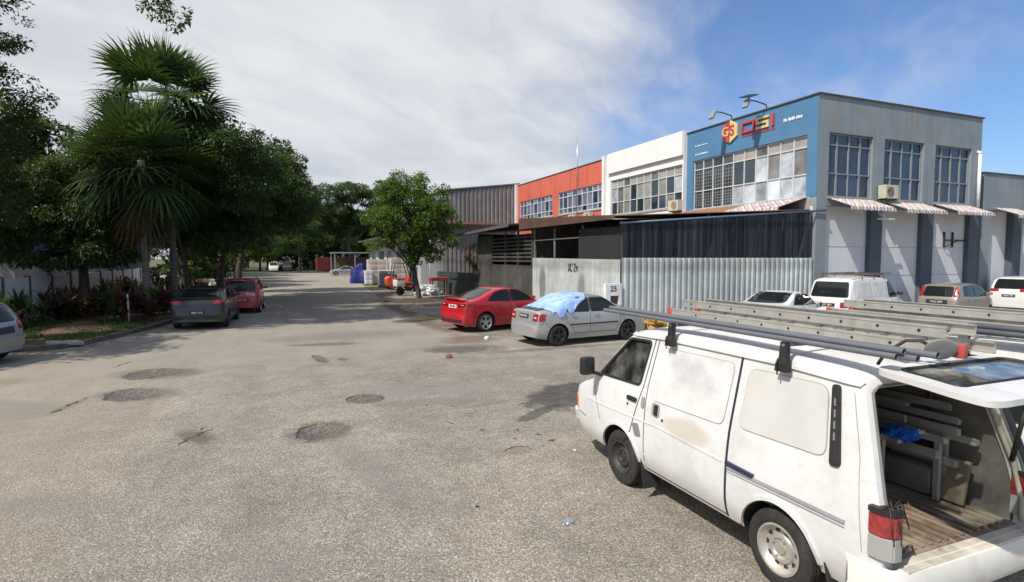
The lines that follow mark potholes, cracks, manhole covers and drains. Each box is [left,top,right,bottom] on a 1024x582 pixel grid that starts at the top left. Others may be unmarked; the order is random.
crack [178,427,213,445]
